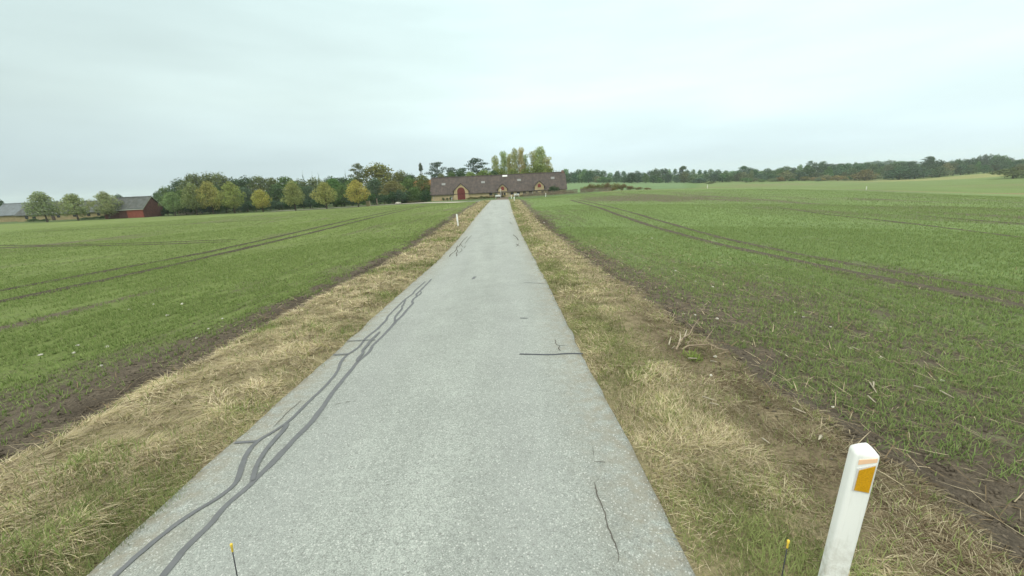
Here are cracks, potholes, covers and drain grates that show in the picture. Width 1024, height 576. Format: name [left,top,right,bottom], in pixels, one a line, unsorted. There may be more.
crack [592,446,619,563]
